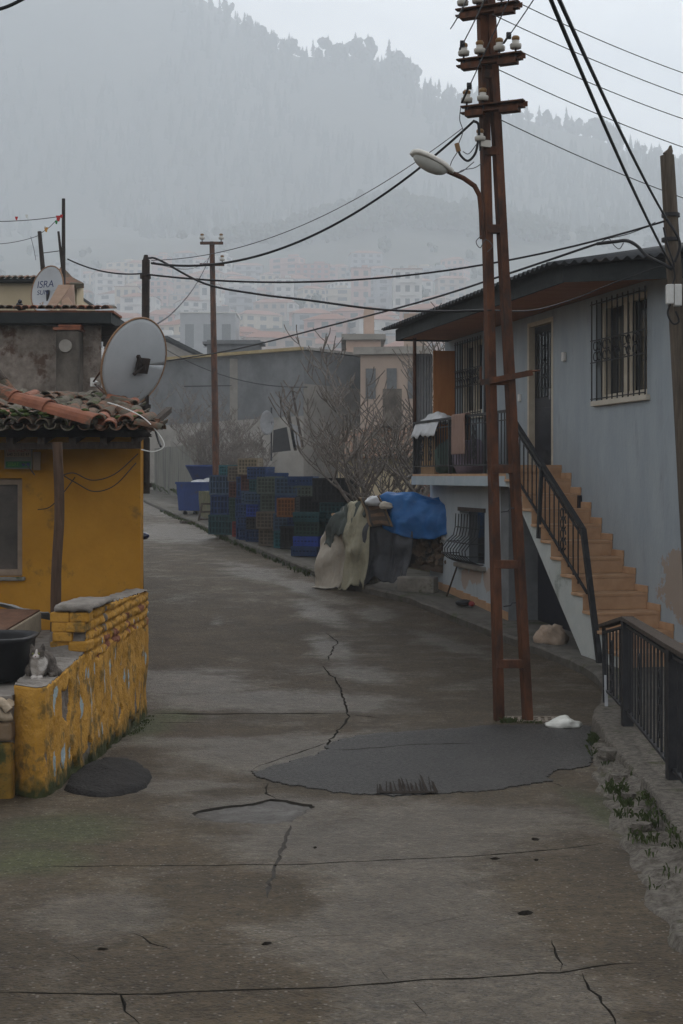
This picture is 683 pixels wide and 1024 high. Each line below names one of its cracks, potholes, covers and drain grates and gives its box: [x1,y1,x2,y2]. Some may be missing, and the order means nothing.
crack [76,920,336,950]
crack [254,633,350,798]
